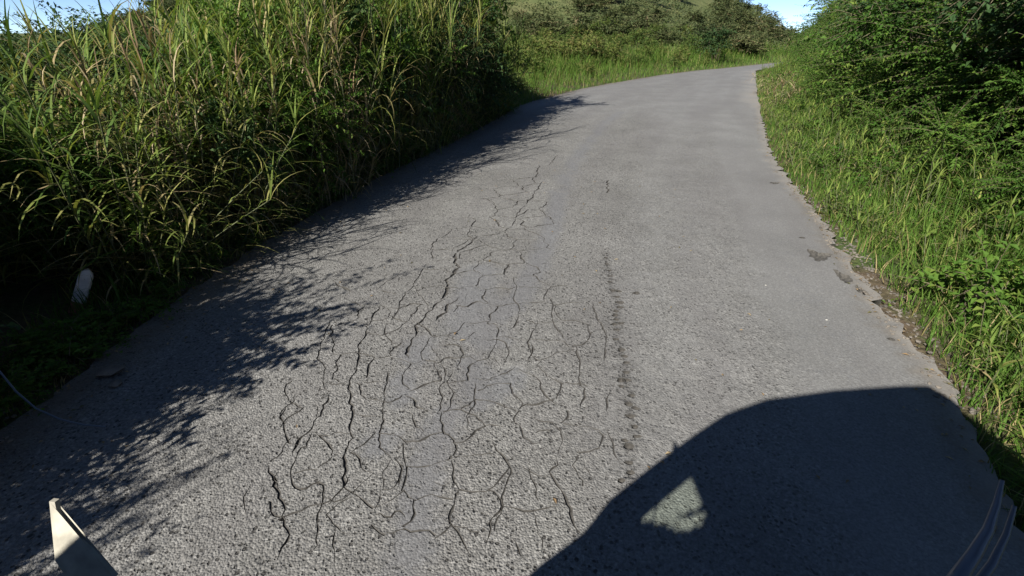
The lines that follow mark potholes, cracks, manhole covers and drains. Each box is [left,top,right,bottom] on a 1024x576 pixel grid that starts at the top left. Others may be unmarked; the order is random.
pothole [833,269,853,284]
pothole [807,249,833,262]
crack [243,155,618,565]
